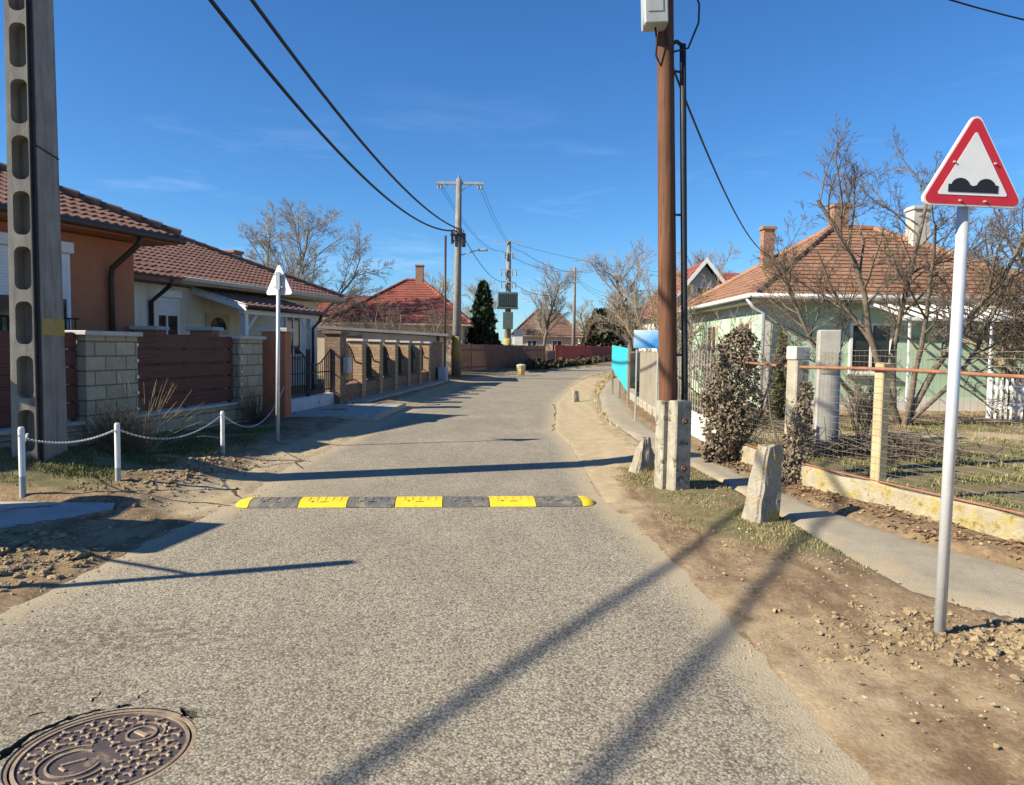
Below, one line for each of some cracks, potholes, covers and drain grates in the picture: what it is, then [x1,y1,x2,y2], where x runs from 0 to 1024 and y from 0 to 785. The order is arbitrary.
manhole cover [1,709,196,785]
